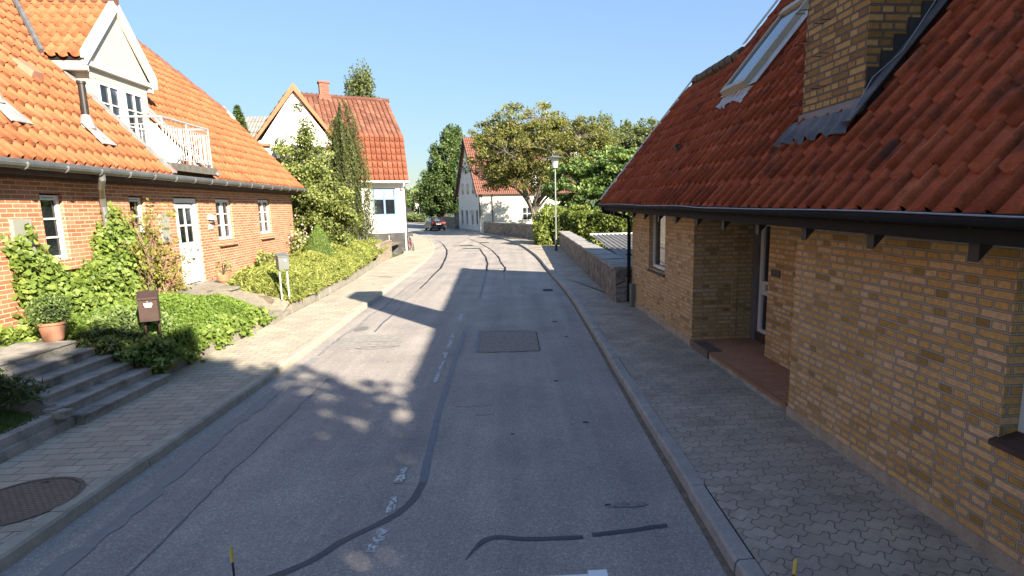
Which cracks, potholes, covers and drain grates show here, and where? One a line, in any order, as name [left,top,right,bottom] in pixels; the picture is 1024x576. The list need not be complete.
manhole cover [0,476,86,527]
